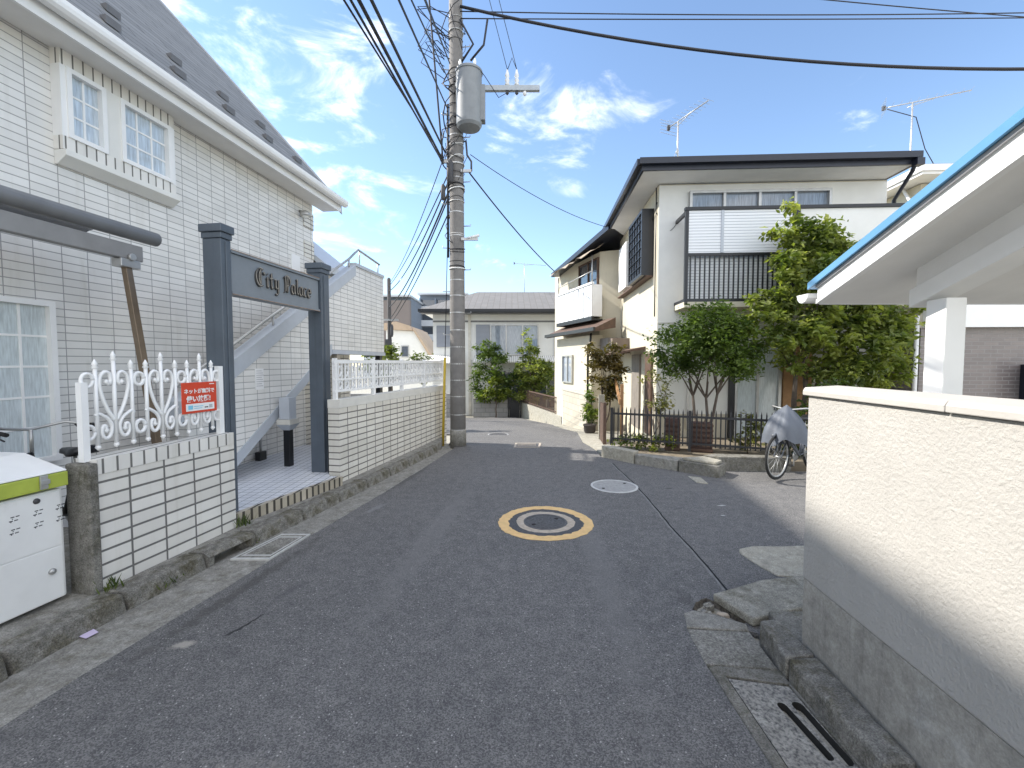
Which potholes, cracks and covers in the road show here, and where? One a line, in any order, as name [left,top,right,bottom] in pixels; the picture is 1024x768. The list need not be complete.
manhole cover [498,506,594,541]
crack [225,613,265,636]
pothole [692,598,746,623]
manhole cover [591,480,638,493]
